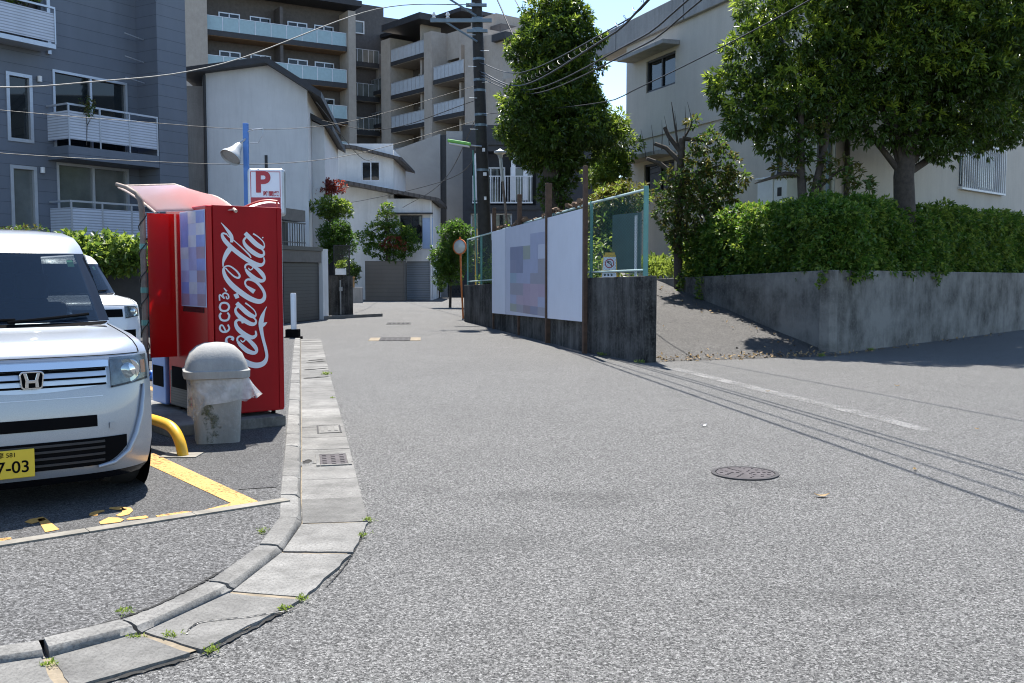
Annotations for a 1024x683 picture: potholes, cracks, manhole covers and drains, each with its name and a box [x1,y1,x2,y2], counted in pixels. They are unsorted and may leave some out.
utility cover [317,425,342,434]
manhole cover [711,466,780,481]
